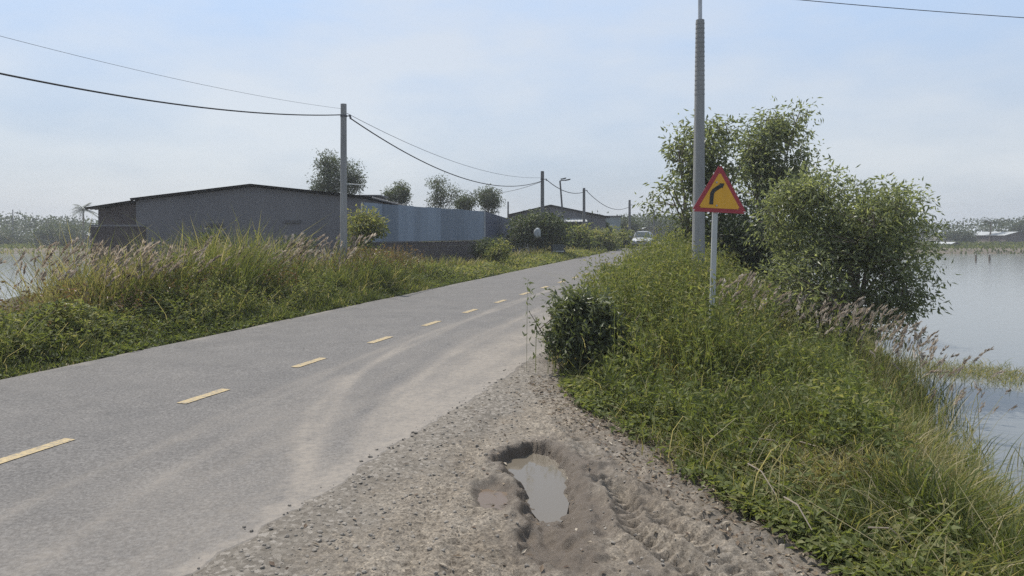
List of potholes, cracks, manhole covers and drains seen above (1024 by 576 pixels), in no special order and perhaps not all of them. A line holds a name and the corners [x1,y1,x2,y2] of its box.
pothole [487,438,597,569]
pothole [464,473,516,512]
